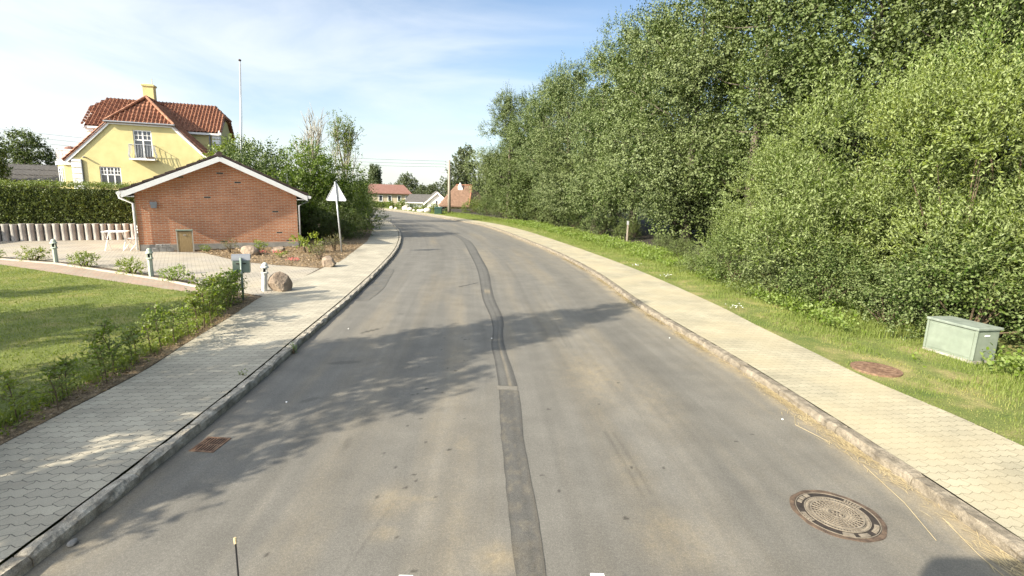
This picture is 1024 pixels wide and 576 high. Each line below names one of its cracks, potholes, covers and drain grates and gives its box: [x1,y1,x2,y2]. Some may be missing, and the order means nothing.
manhole cover [789,490,887,542]
drain grate [189,436,231,453]
